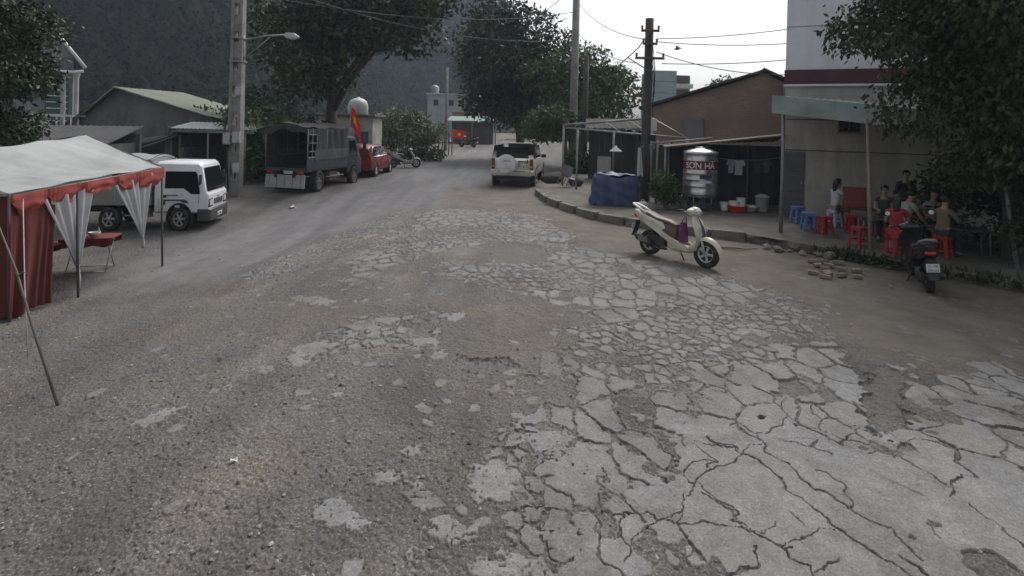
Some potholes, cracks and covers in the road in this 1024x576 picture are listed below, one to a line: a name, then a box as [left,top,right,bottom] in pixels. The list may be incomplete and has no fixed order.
pothole [451,353,521,375]
crack [241,209,1024,576]
pothole [854,364,917,442]
